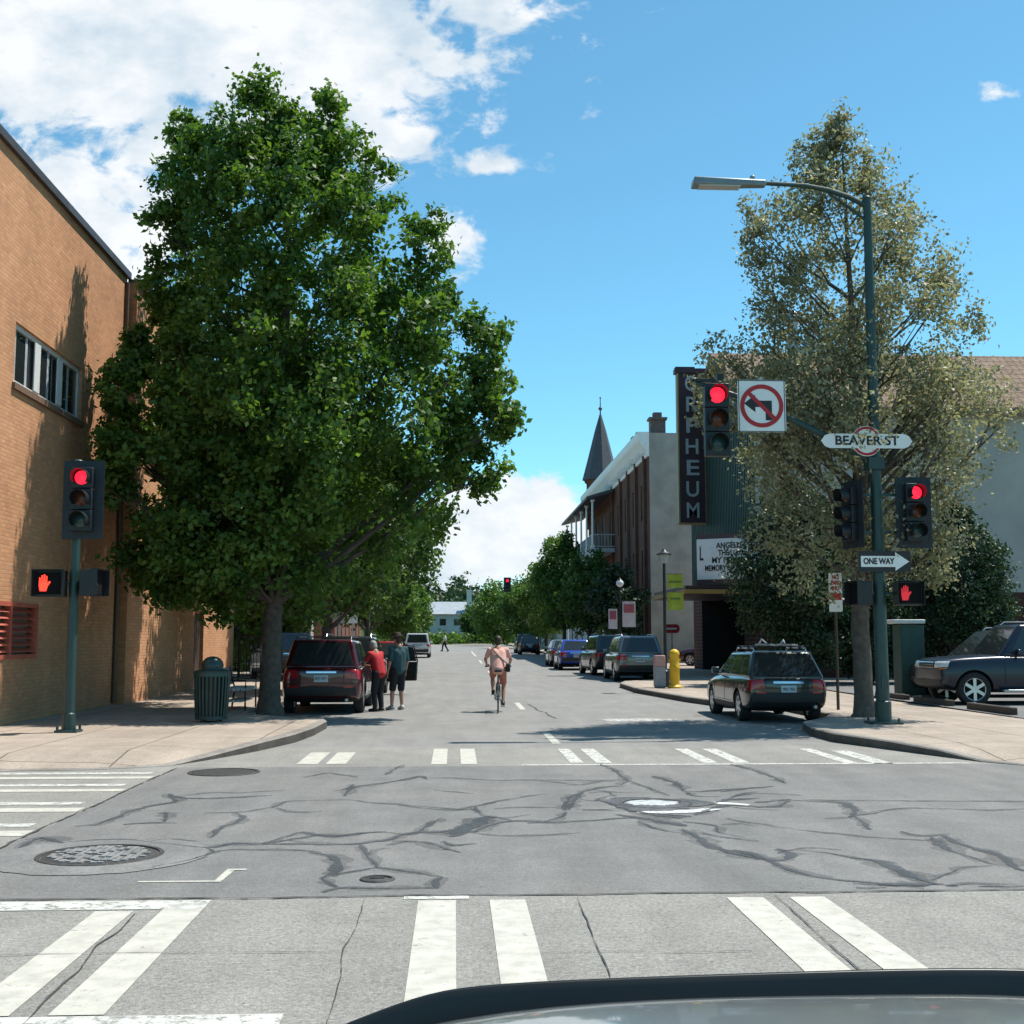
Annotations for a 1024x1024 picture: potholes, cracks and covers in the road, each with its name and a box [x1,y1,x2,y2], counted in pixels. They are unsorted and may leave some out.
utility cover [359,875,395,883]
manhole cover [187,768,260,776]
crack [326,898,365,1024]
crack [548,896,748,978]
manhole cover [0,838,209,875]
